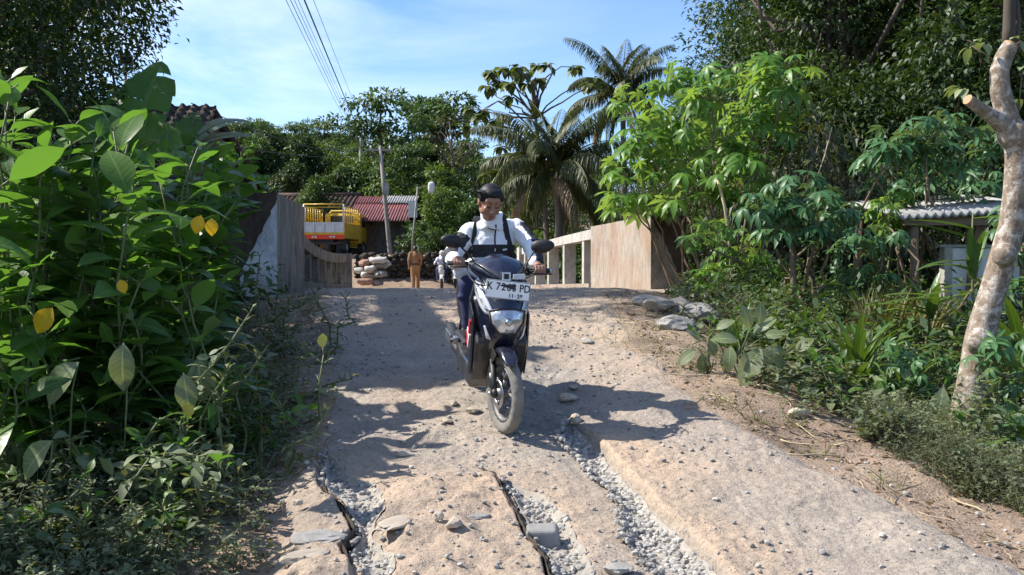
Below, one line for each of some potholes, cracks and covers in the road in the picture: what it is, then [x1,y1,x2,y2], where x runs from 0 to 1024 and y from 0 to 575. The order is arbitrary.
crack [321,485,356,557]
crack [481,468,551,575]
